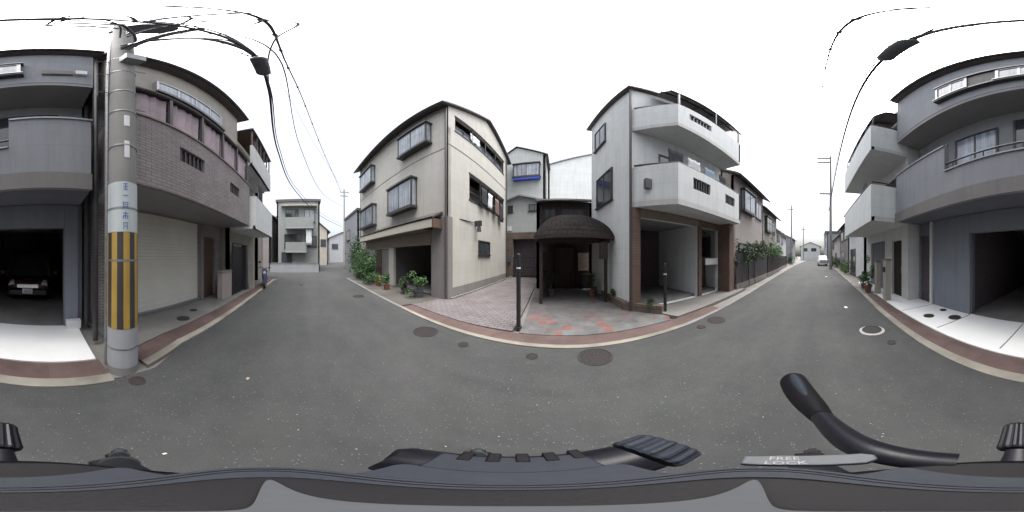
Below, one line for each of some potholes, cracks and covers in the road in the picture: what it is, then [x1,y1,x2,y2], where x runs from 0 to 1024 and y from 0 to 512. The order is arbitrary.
manhole cover [413,327,438,337]
manhole cover [128,376,146,385]
manhole cover [859,326,885,335]
manhole cover [577,348,613,366]
